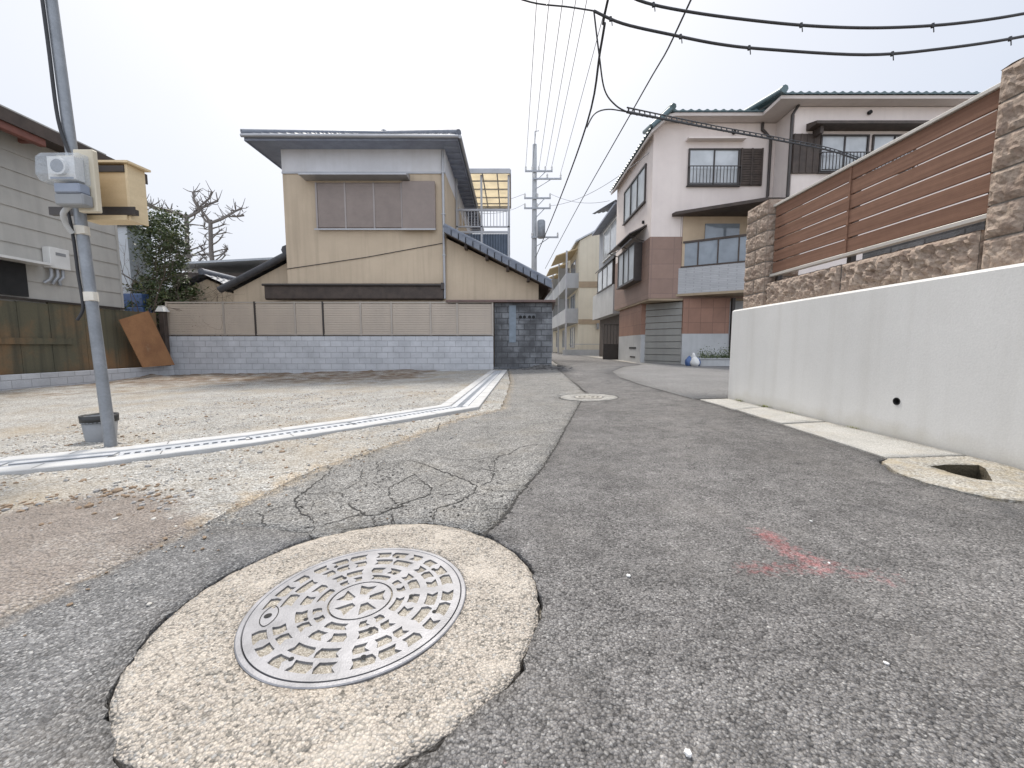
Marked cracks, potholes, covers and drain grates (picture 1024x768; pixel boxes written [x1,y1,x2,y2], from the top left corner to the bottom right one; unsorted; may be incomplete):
manhole cover [560,394,618,402]
manhole cover [109,524,540,768]
crack [258,444,536,532]
